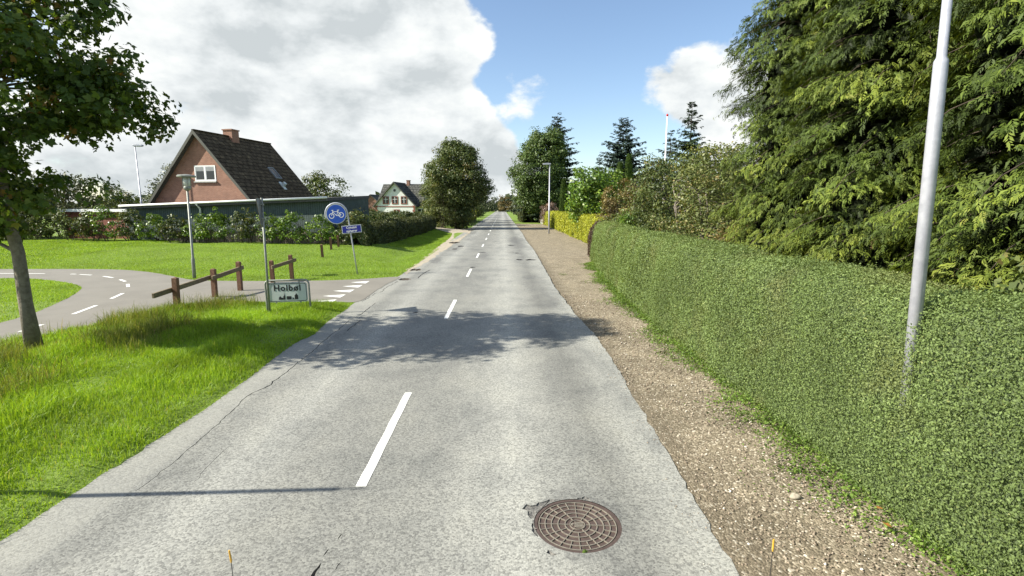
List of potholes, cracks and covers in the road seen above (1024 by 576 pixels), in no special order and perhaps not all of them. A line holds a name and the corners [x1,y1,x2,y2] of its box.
crack [136,303,375,491]
crack [311,535,341,576]
manhole cover [534,500,622,553]
